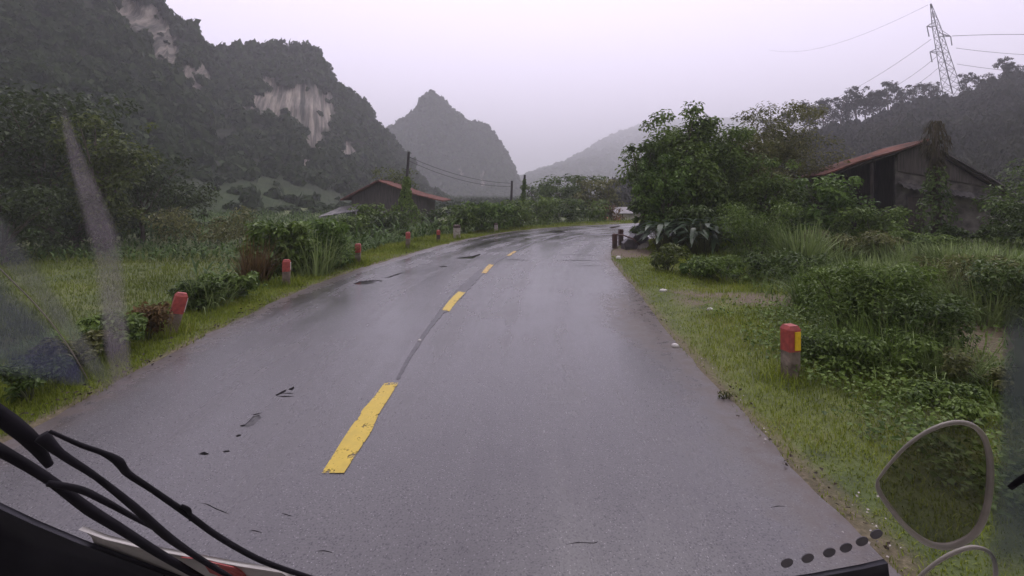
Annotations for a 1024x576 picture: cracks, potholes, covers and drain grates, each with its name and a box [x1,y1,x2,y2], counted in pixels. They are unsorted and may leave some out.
pothole [240,415,261,428]
